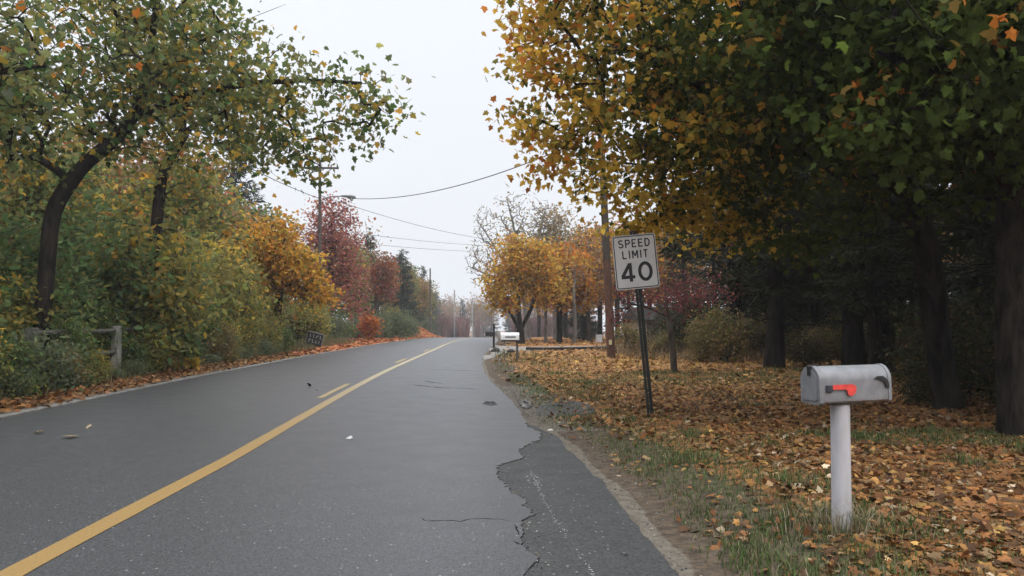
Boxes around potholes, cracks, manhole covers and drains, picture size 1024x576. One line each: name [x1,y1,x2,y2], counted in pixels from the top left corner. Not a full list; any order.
crack [422,518,540,563]
